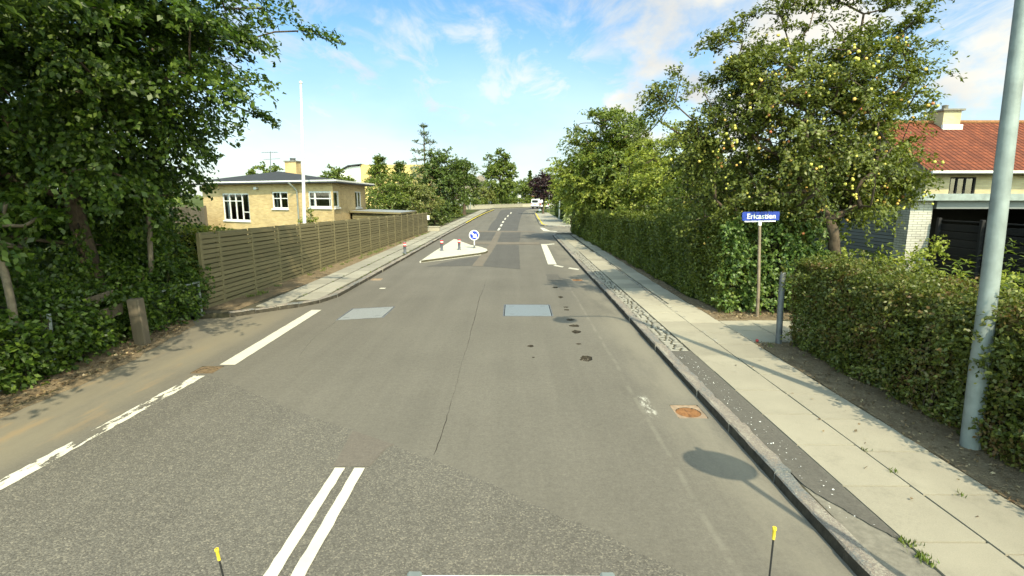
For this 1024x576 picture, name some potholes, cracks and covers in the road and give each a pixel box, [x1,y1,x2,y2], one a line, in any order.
crack [434,285,485,454]
